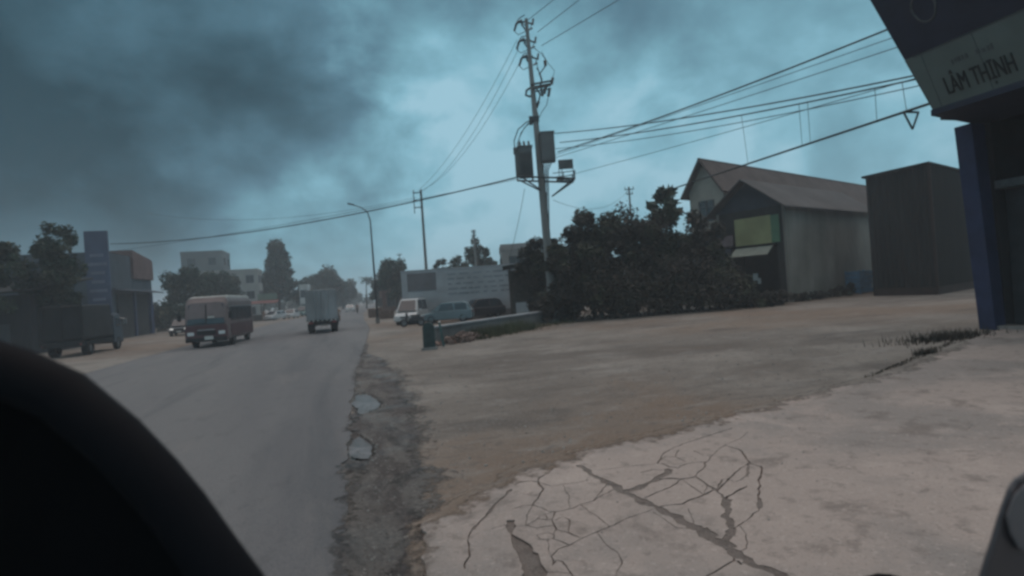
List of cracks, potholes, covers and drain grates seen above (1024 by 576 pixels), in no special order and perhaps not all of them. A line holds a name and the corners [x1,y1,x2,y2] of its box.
pothole [346,433,376,461]
pothole [348,392,384,415]
crack [464,490,512,569]
crack [492,429,788,576]
